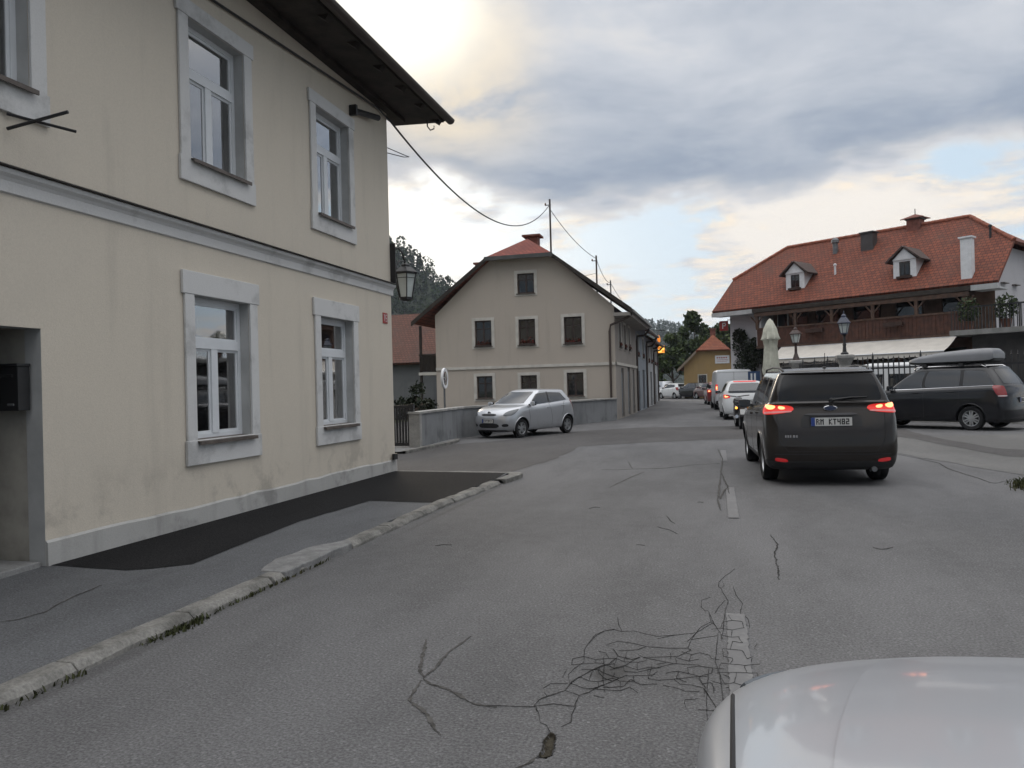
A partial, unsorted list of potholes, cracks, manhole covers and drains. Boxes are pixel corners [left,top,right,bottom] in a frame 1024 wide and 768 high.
crack [771,536,780,580]
crack [2,585,101,622]
crack [702,450,730,510]
crack [408,570,758,736]
pothole [539,732,555,759]
